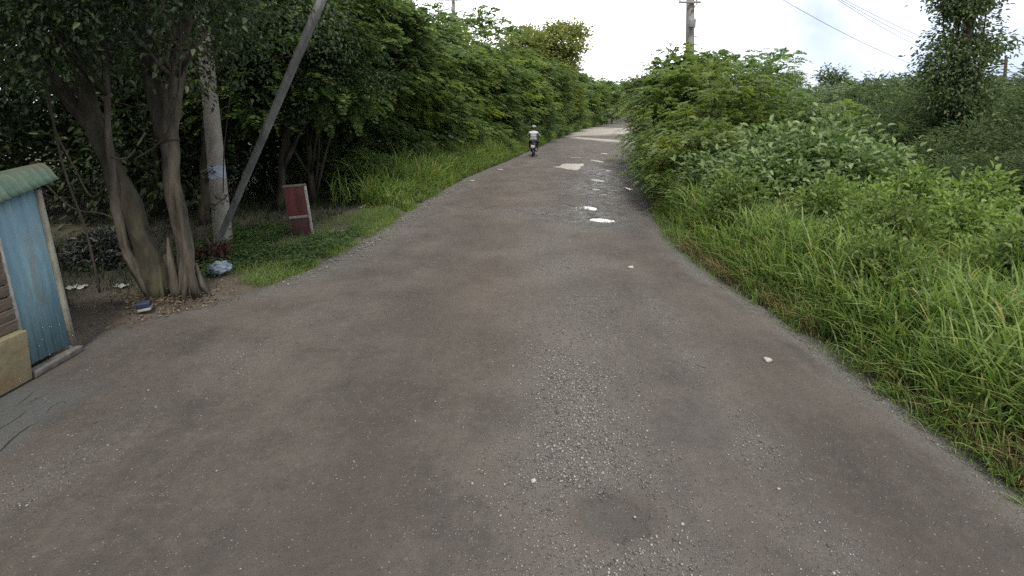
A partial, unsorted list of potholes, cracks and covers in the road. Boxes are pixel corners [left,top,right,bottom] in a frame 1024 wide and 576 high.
pothole [562,203,597,211]
crack [0,392,65,452]
